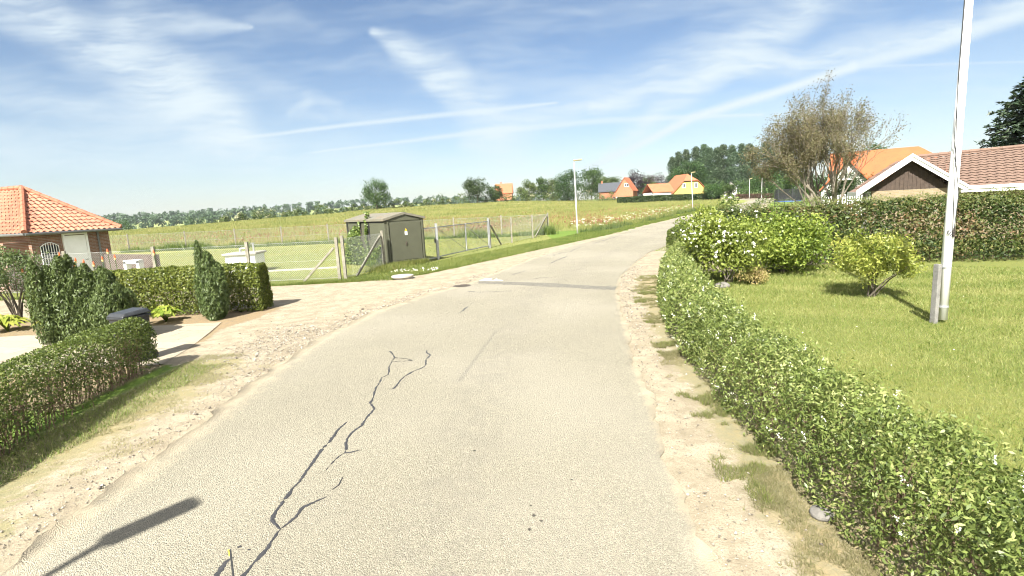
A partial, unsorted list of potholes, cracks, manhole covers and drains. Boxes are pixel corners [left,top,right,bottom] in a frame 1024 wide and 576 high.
crack [214,545,250,576]
crack [326,350,431,470]
